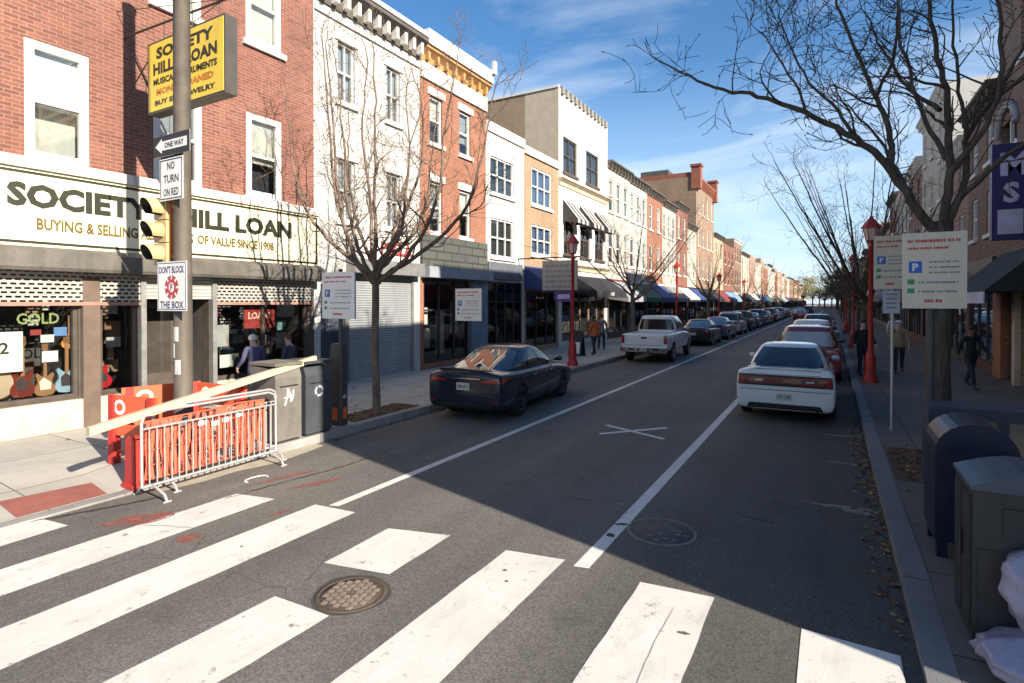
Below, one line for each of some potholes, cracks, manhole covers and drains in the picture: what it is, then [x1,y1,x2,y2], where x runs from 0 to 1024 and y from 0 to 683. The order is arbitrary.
manhole cover [627,518,698,547]
crack [636,607,674,683]
manhole cover [314,576,387,613]
